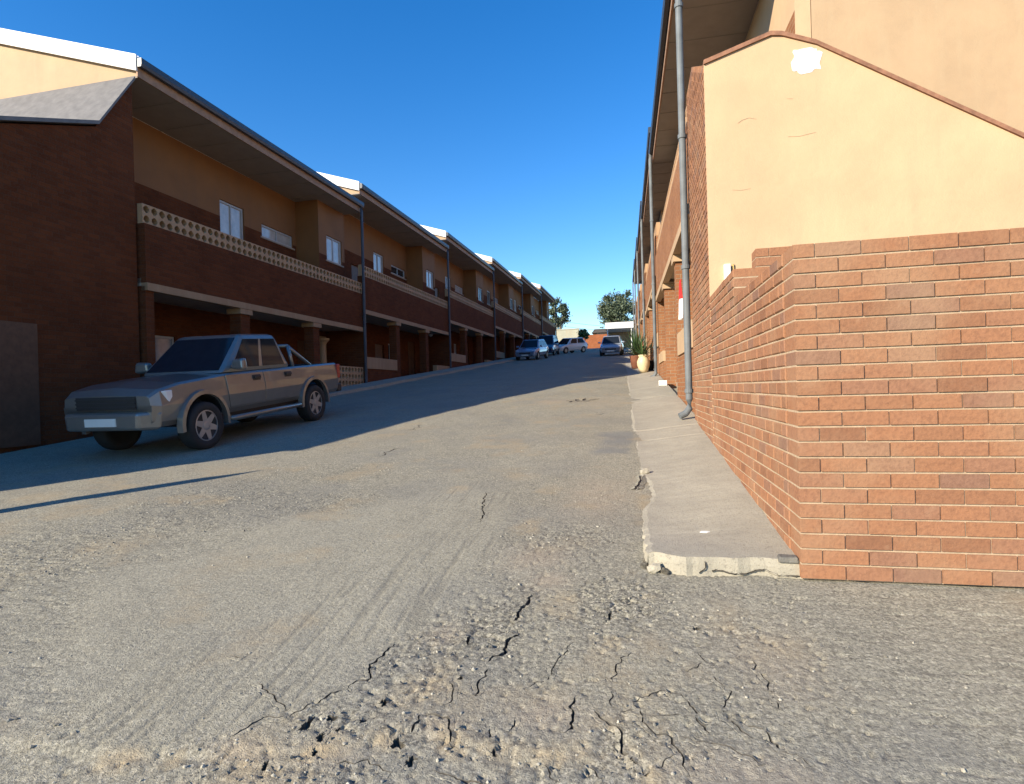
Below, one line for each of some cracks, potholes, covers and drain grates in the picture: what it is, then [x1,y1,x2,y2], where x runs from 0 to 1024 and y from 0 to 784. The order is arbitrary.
crack [429,766,497,784]
crack [475,492,491,522]
crack [539,763,562,784]
crack [227,593,814,780]
